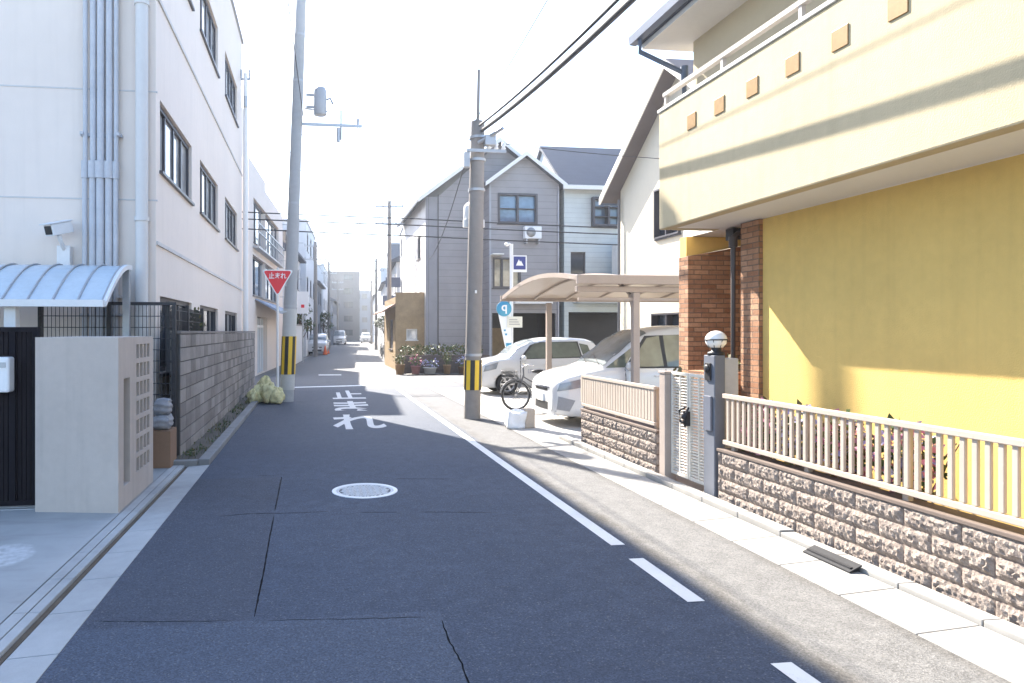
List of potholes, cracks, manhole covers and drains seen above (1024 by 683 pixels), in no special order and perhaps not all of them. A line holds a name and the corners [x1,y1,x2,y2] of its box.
manhole cover [332,483,398,498]
crack [442,621,470,683]
